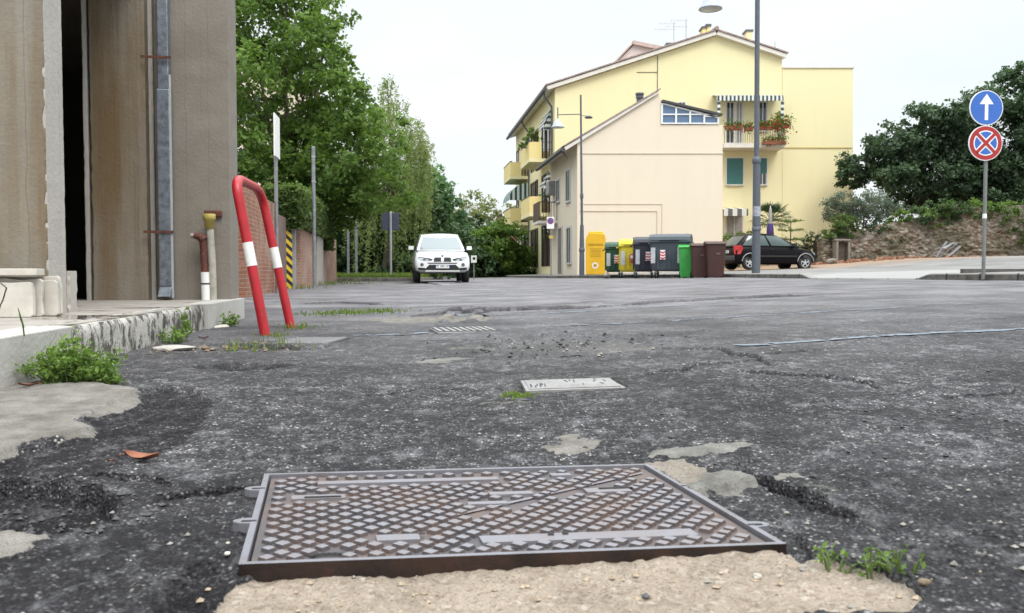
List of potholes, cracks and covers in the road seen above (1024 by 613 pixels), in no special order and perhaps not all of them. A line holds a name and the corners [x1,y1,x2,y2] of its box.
pothole [0,477,120,535]
crack [952,389,1017,399]
manhole cover [520,378,626,394]
crack [643,346,889,389]
pothole [210,362,284,372]
manhole cover [233,464,787,582]
